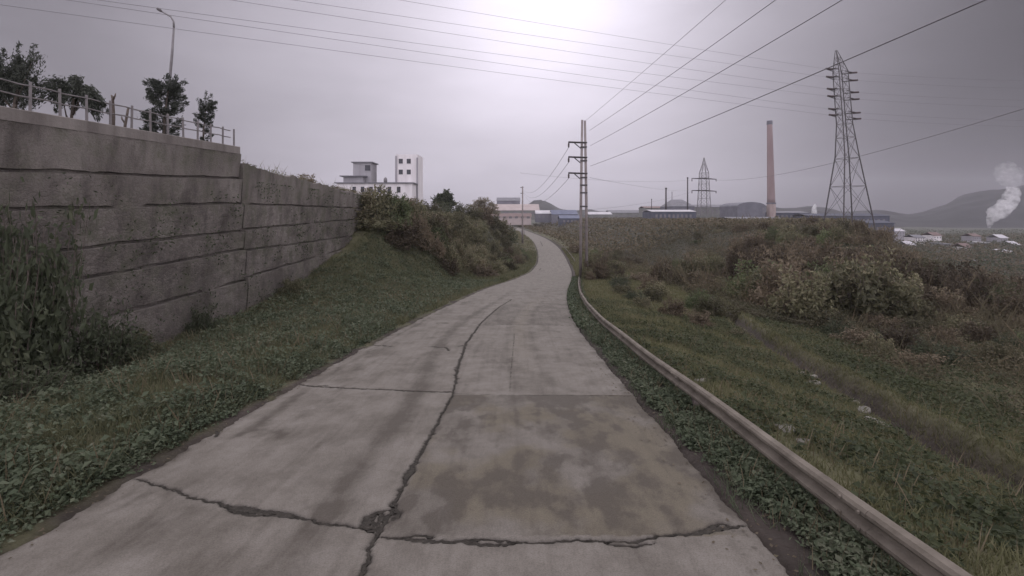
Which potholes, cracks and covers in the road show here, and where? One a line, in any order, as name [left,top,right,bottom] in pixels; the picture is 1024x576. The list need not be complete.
crack [136,299,744,576]
